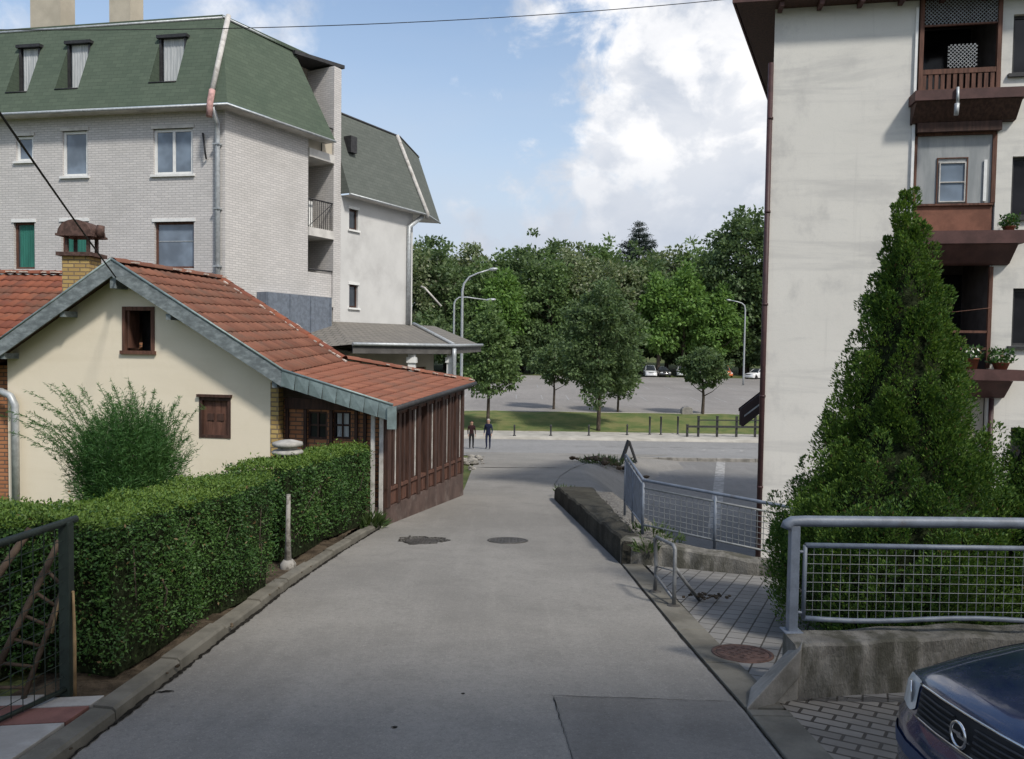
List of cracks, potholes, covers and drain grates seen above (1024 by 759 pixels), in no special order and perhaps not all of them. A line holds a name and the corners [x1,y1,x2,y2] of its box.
manhole cover [711,644,774,663]
